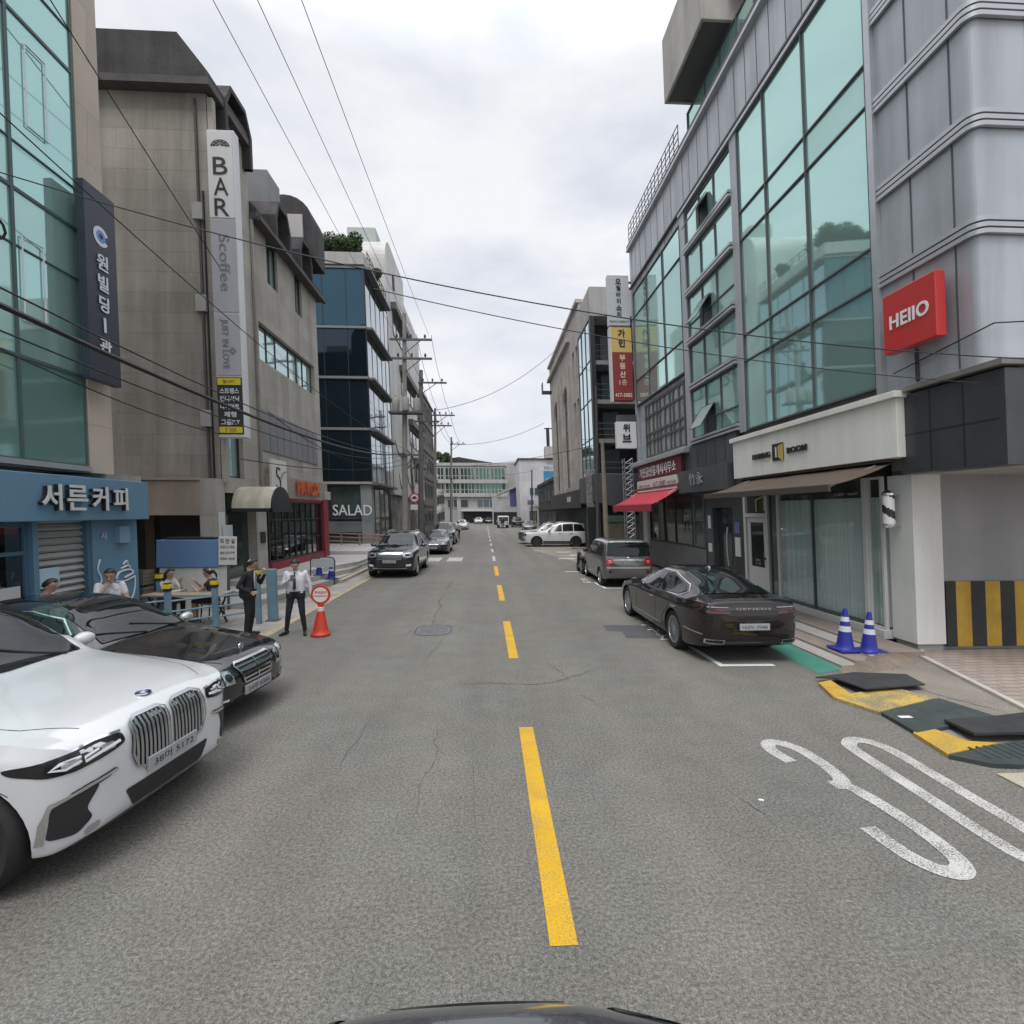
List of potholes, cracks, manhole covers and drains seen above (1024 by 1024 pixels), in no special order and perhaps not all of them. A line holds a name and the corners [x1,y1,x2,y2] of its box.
manhole cover [413,625,454,635]
crack [458,664,602,708]
